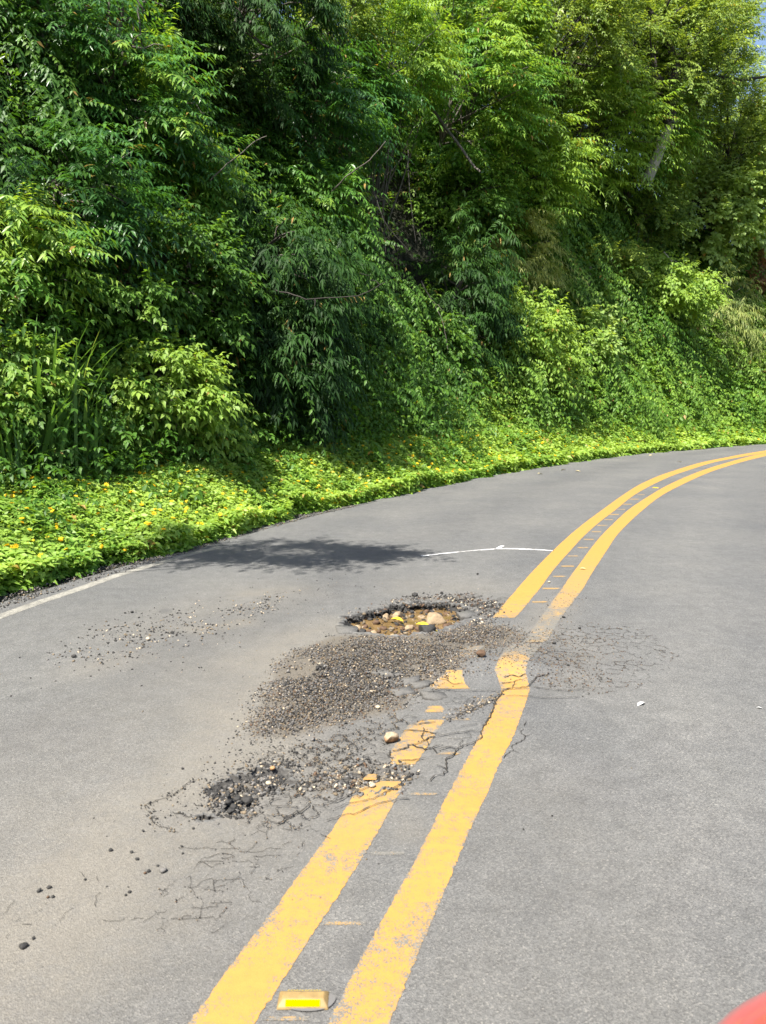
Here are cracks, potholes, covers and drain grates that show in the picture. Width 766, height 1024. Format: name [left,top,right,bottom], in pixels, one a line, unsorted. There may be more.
pothole [201,765,301,816]
pothole [337,599,484,637]
crack [102,624,674,933]
